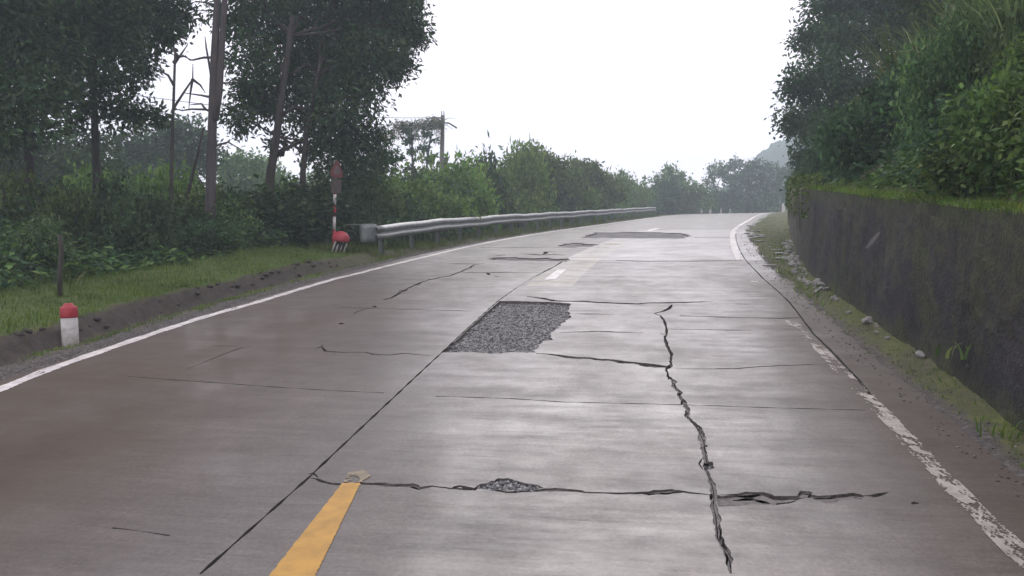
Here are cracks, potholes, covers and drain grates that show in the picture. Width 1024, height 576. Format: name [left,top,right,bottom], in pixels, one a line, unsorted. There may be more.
pothole [476,478,543,493]
pothole [446,301,571,354]
crack [309,296,889,574]
crack [354,264,537,314]
